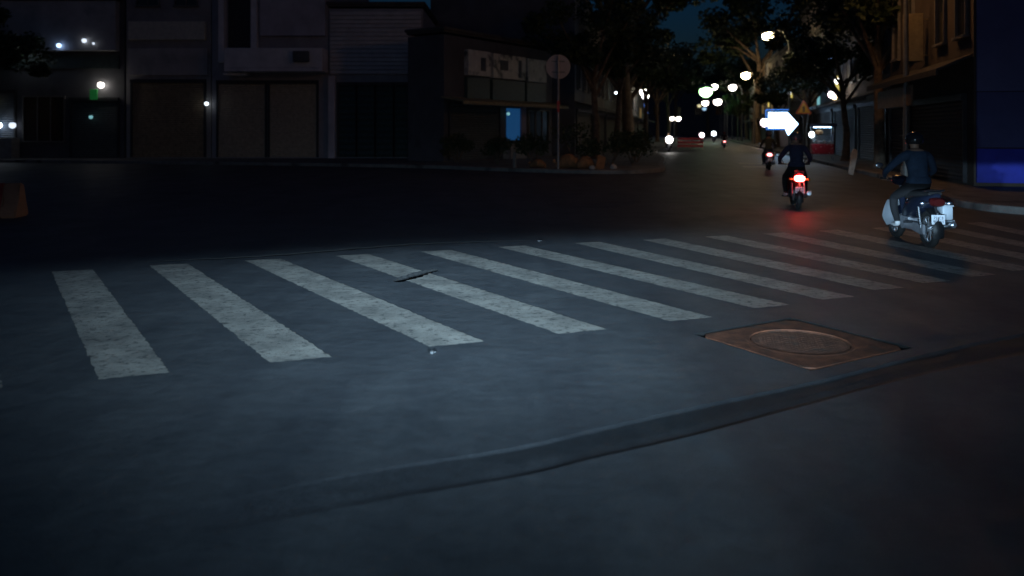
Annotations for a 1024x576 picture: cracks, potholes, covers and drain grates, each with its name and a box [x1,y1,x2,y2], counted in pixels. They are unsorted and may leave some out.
manhole cover [694,318,912,371]
